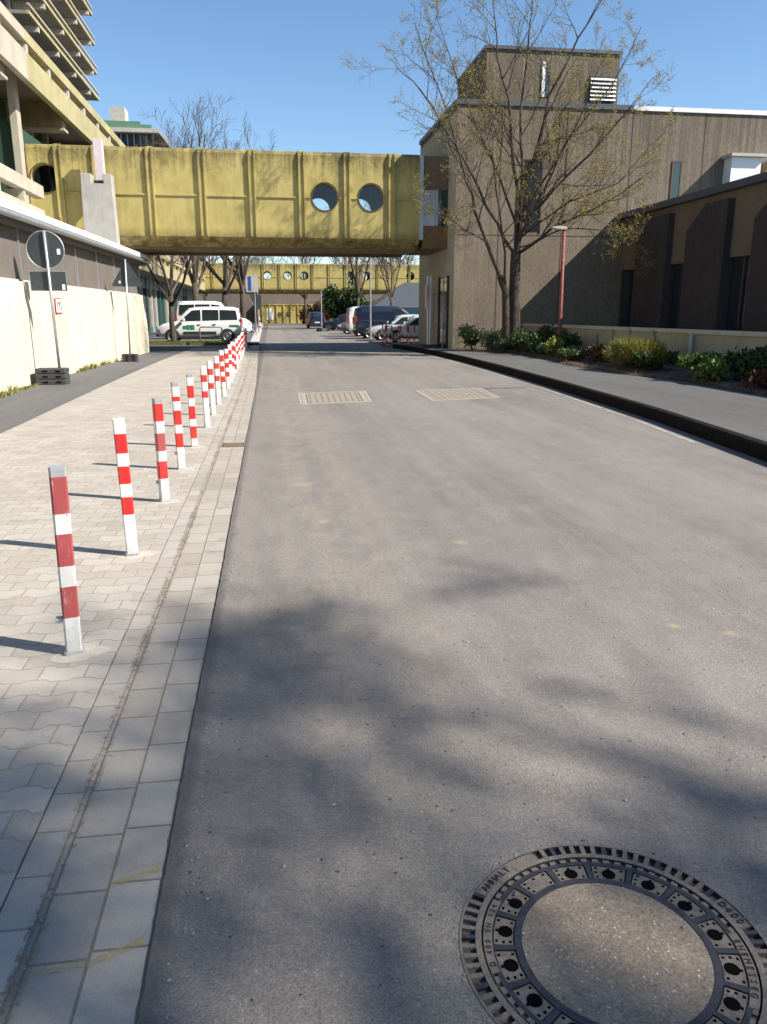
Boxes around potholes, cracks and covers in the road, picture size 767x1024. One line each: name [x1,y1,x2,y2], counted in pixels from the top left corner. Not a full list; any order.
manhole cover [459,844,767,1024]
